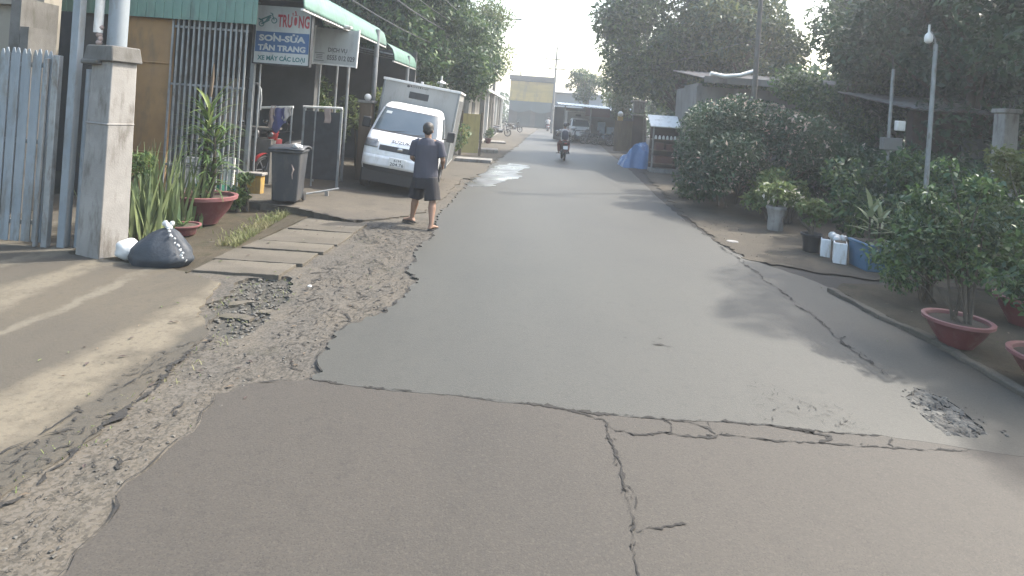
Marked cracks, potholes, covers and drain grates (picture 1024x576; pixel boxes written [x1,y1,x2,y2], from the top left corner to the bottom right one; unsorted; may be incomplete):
crack [0,205,971,576]
pothole [206,278,292,339]
pothole [901,388,989,438]
